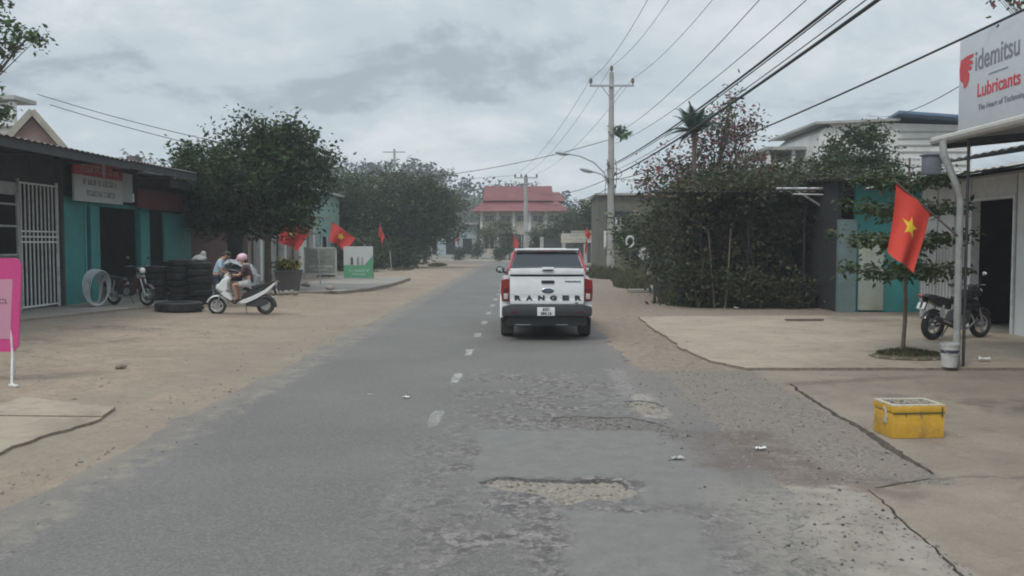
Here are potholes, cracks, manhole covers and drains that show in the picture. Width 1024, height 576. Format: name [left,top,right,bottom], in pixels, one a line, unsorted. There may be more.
pothole [624,400,670,415]
pothole [478,477,638,505]
pothole [551,415,695,440]
